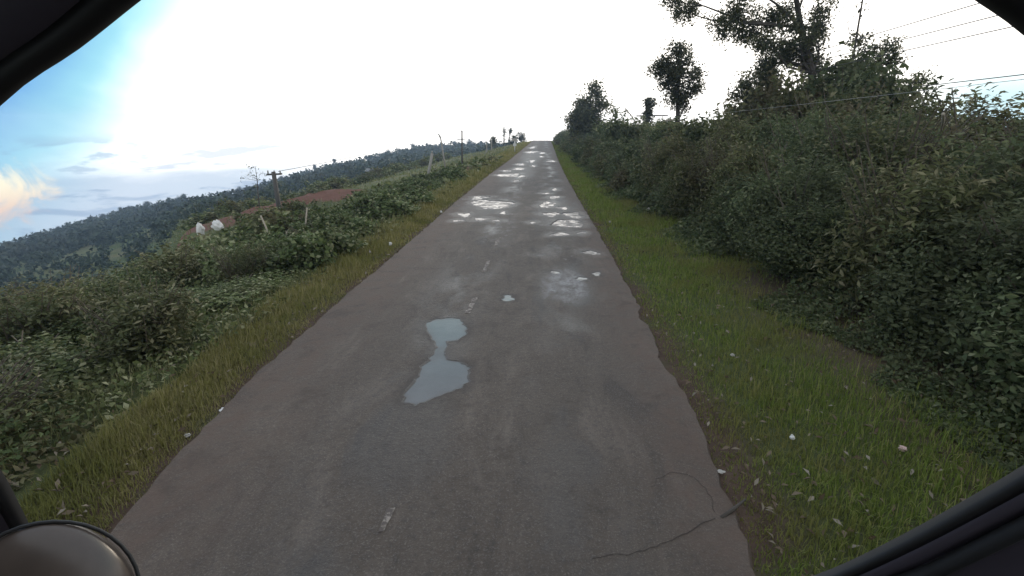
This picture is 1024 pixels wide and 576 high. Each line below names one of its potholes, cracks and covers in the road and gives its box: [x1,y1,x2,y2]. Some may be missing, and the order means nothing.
crack [593,472,715,559]
pothole [470,199,515,209]
pothole [549,219,585,227]
pothole [401,317,472,406]
